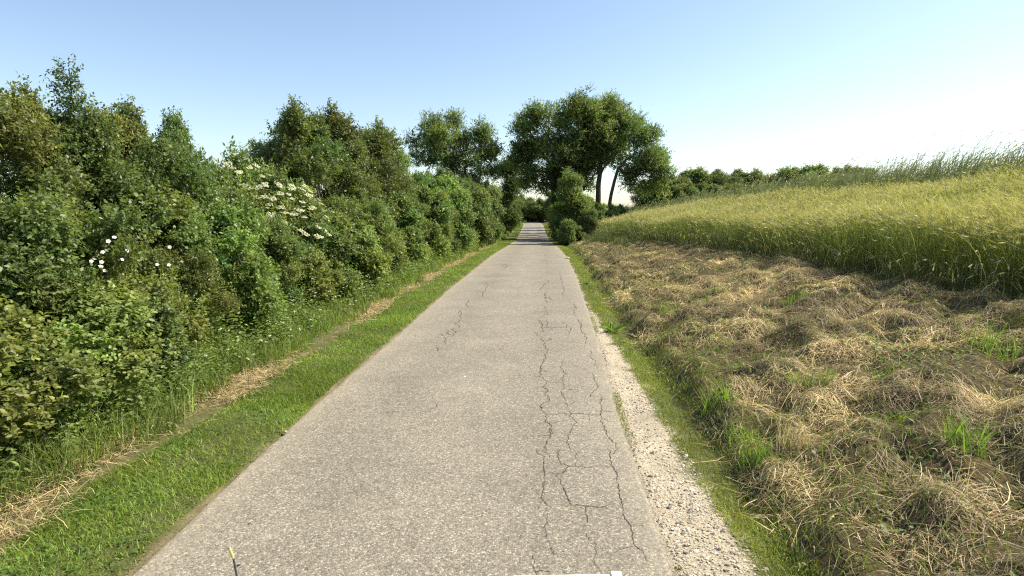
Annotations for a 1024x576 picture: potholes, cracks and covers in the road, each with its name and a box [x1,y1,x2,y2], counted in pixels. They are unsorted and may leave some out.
crack [533,279,598,367]
crack [528,354,648,570]
